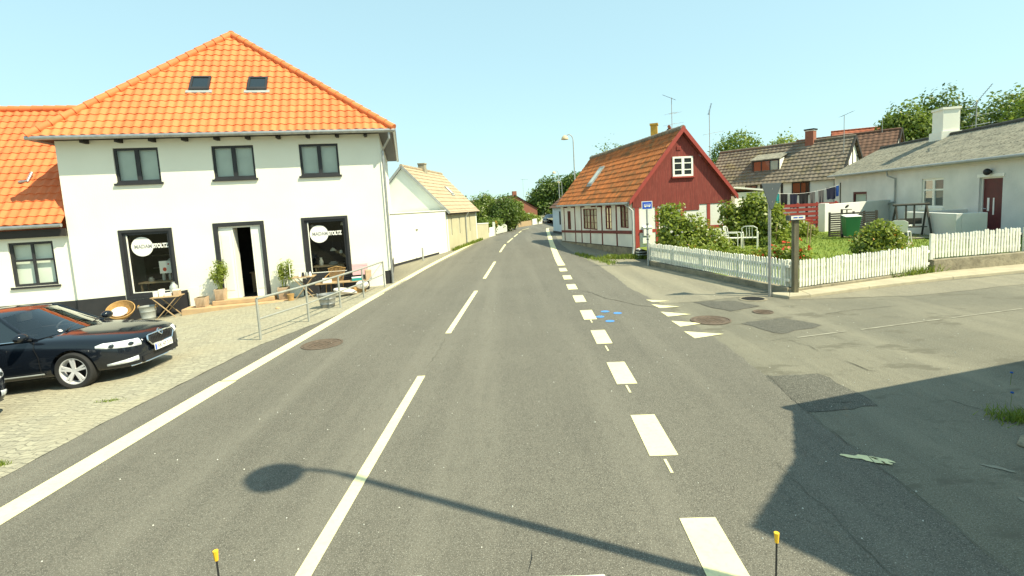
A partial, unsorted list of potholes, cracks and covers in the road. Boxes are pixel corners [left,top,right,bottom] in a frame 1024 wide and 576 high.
manhole cover [300,338,343,350]
manhole cover [690,315,731,325]
